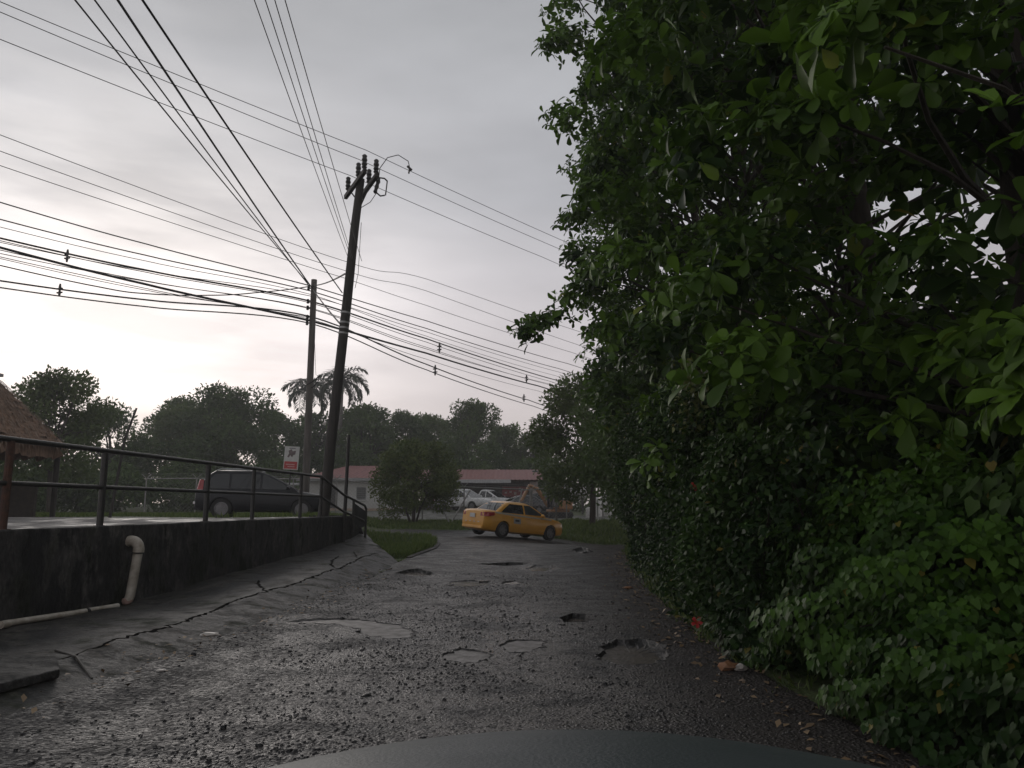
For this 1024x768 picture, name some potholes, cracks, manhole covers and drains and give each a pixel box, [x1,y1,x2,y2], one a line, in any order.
crack [57,552,383,660]
pothole [398,568,434,576]
pothole [594,638,671,666]
pothole [558,613,590,623]
